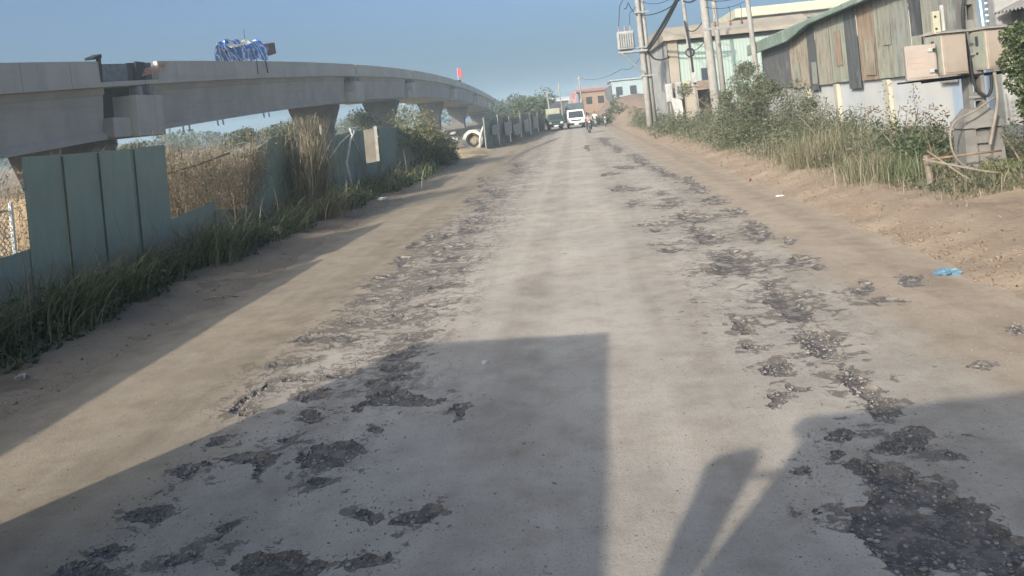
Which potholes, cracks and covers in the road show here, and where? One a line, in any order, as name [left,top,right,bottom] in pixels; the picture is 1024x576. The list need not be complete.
pothole [741,342,766,350]
pothole [840,457,1024,576]
pothole [682,176,710,194]
pothole [701,249,775,276]
pothole [388,503,445,526]
pothole [846,280,875,296]
pothole [831,362,904,420]
pothole [823,428,857,443]
pothole [693,233,728,245]
pothole [676,213,714,223]
pothole [966,361,1000,369]
pothole [939,449,961,461]
